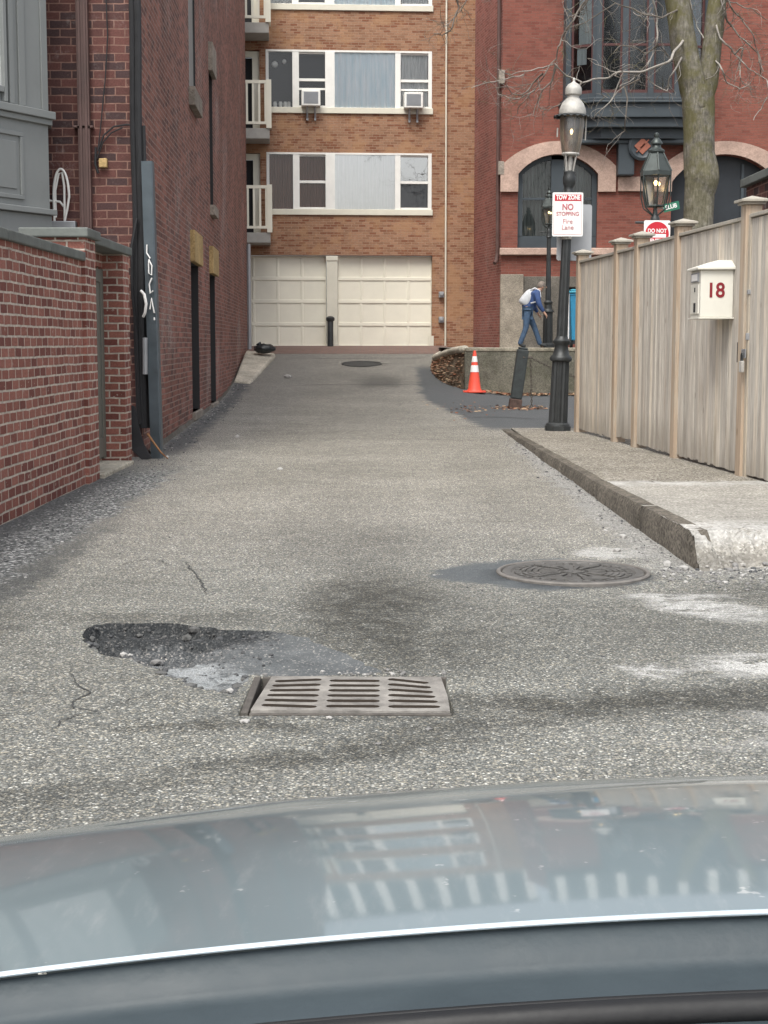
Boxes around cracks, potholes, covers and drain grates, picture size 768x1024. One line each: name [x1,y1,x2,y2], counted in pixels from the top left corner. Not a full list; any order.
manhole cover [496,559,651,587]
drain grate [241,676,452,717]
crack [9,662,167,731]
pothole [82,623,382,695]
